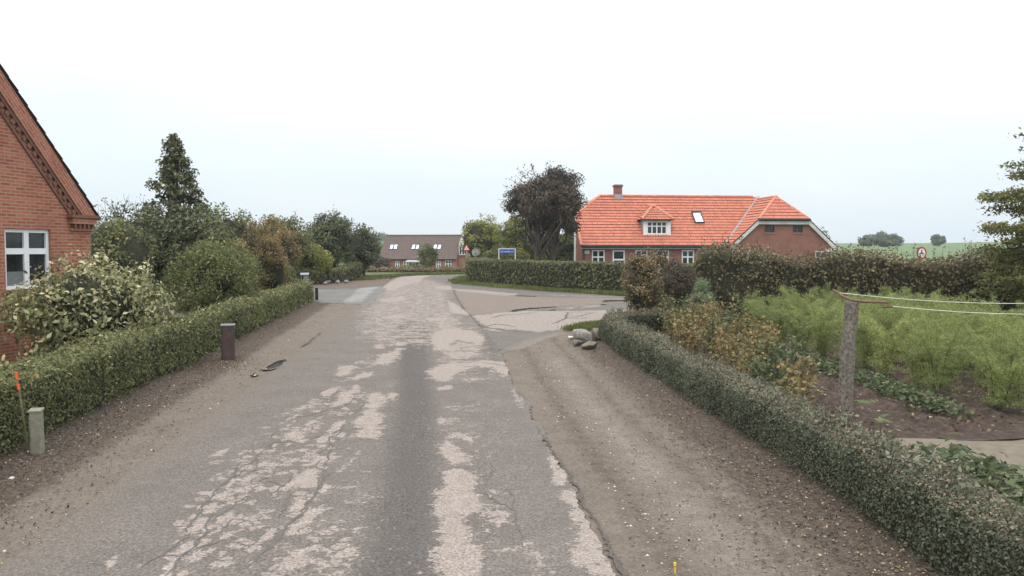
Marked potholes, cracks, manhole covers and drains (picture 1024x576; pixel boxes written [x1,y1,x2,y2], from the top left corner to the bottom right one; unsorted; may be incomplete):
crack [142,399,369,576]
crack [461,361,629,576]
